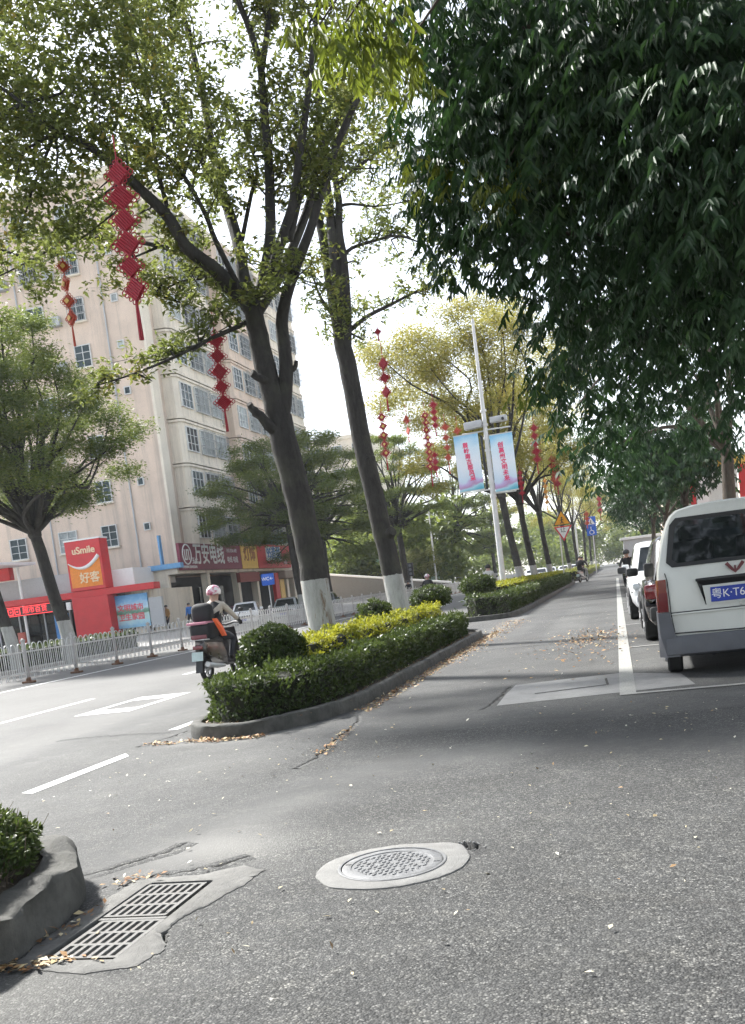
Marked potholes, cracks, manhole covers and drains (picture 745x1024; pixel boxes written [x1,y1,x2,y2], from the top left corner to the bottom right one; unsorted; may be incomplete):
crack [83,843,256,880]
manhole cover [315,842,470,890]
drain grate [48,919,164,960]
crack [477,685,515,710]
drain grate [104,882,207,918]
